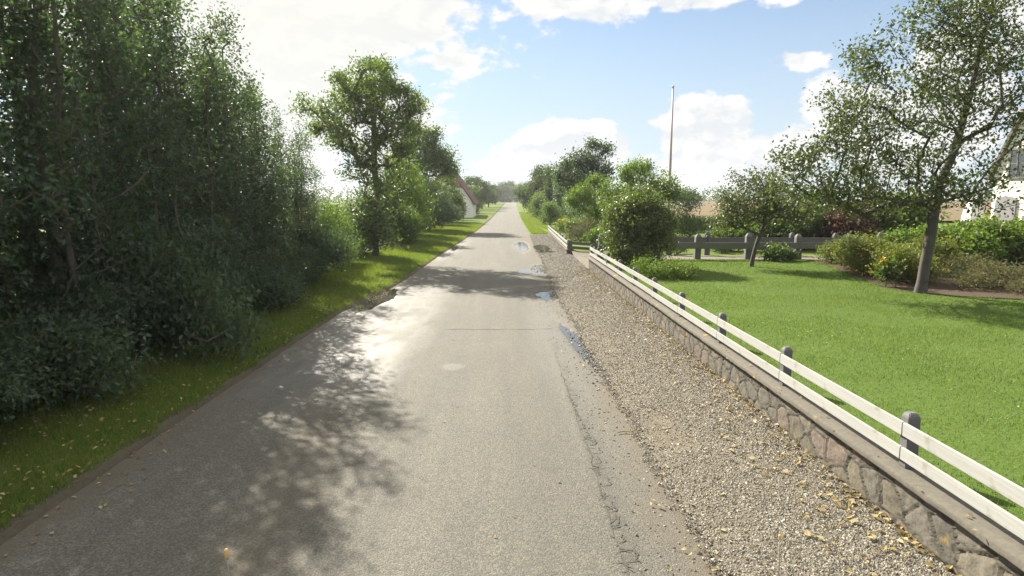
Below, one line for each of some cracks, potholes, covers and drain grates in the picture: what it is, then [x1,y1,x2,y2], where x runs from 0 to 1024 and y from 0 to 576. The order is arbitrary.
crack [550,338,643,576]
